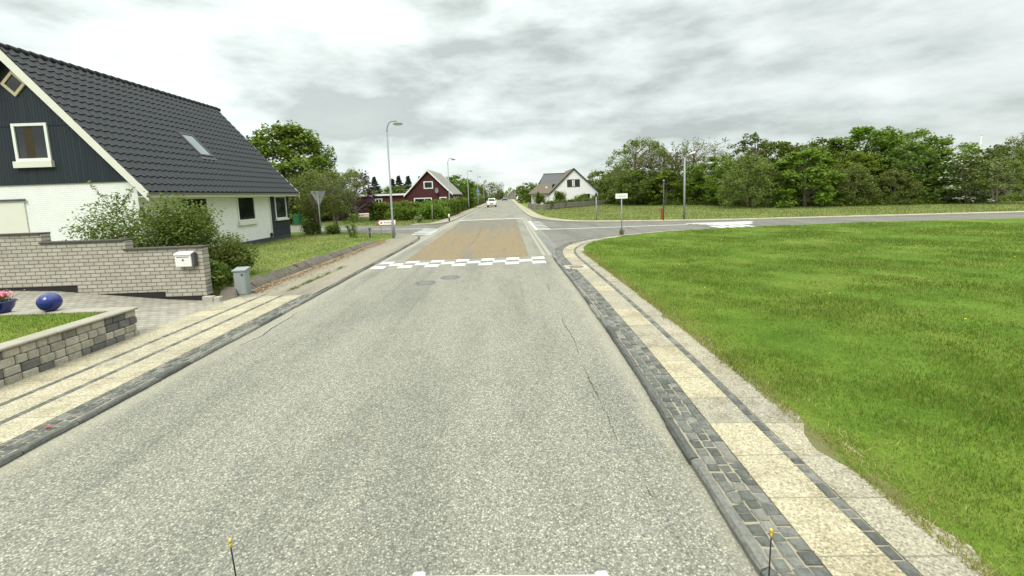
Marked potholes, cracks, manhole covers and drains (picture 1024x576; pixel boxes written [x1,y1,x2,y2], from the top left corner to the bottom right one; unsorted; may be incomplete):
crack [548,287,653,497]
